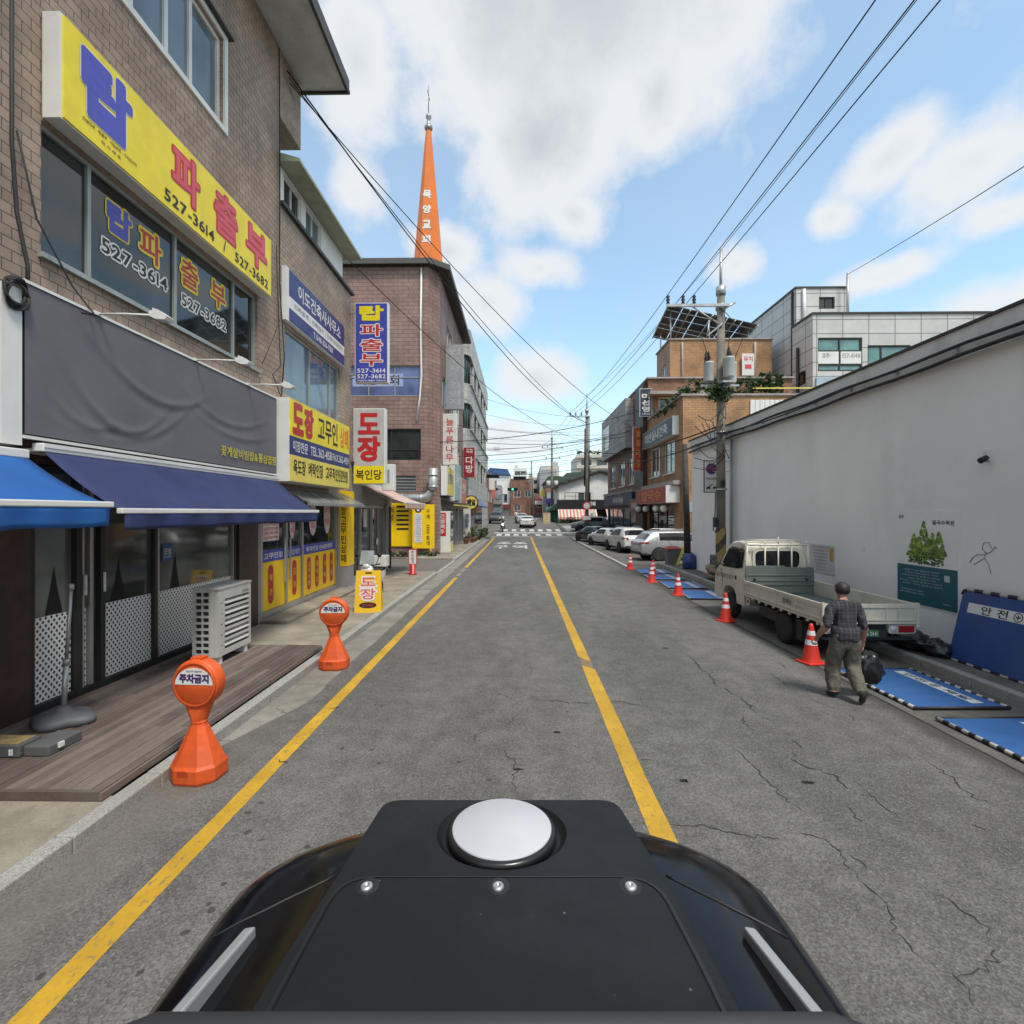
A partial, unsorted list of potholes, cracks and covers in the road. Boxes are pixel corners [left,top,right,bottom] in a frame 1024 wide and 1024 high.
crack [930,763,995,806]
crack [803,833,1000,1016]
crack [682,652,901,821]
crack [674,824,785,839]
